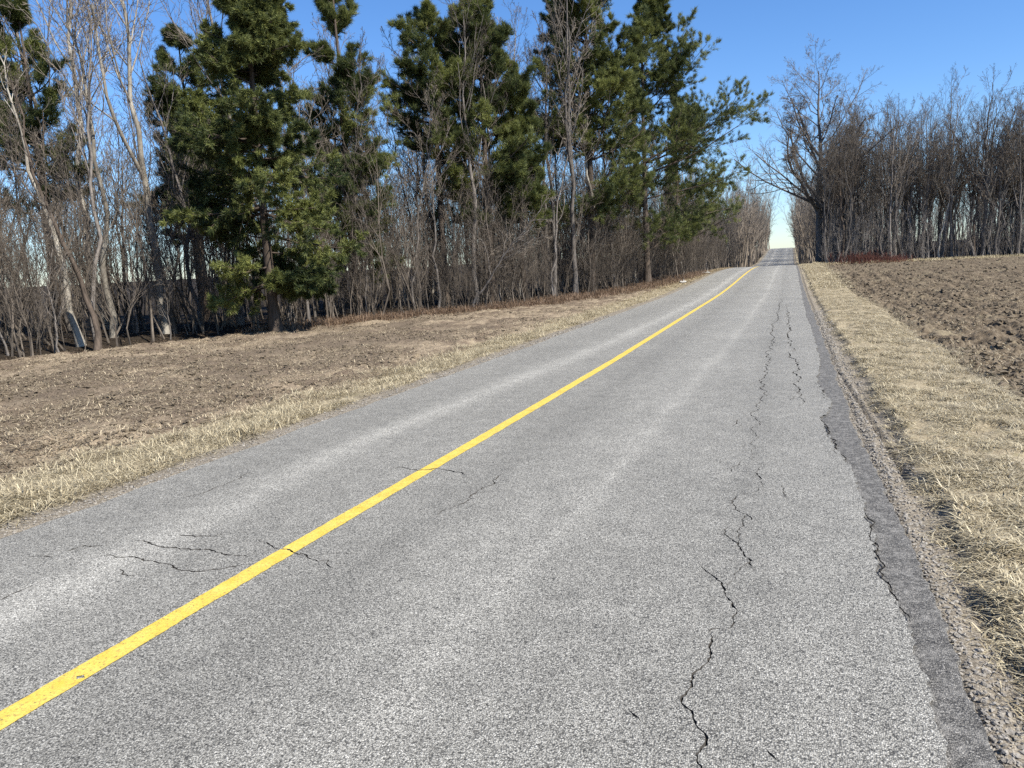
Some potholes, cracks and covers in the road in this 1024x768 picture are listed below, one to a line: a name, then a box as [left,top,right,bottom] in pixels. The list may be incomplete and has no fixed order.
crack [392,467,503,512]
crack [68,534,351,576]
crack [680,298,828,768]
crack [864,511,910,621]
